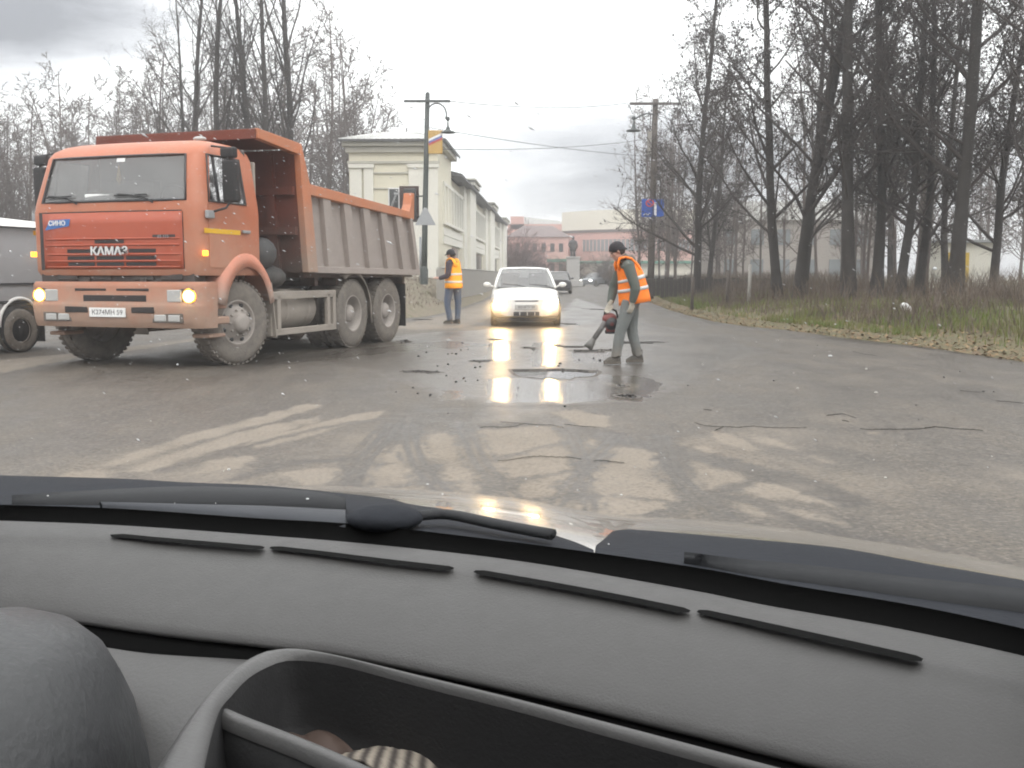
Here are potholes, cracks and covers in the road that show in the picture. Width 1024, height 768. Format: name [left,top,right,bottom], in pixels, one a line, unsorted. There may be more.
pothole [508,368,602,380]
crack [694,409,807,431]
crack [826,413,983,431]
